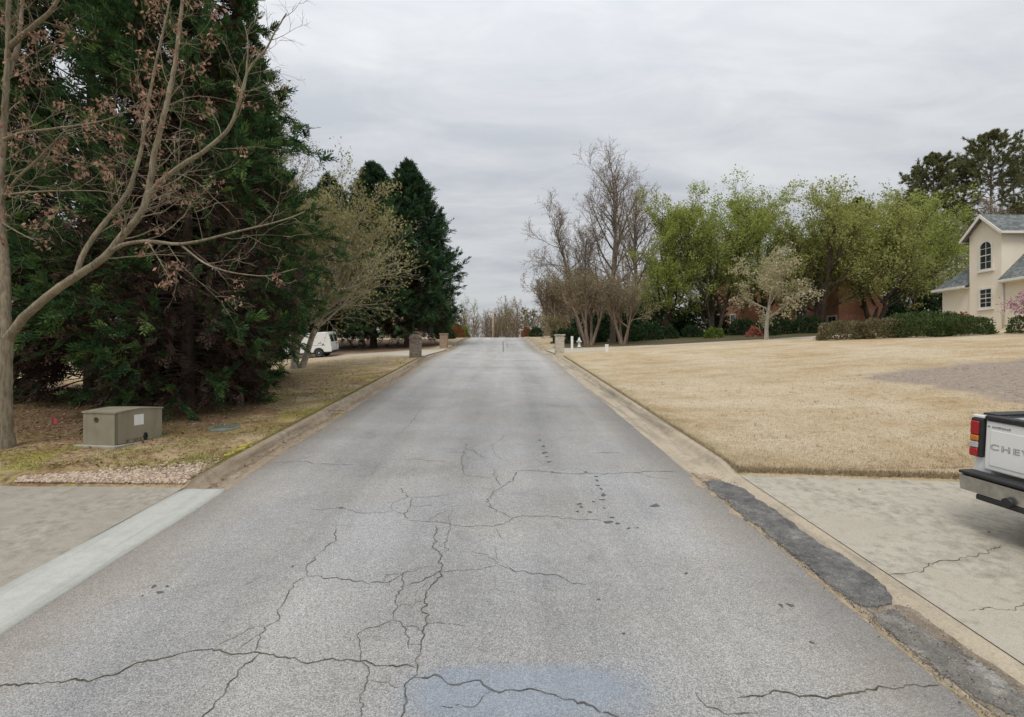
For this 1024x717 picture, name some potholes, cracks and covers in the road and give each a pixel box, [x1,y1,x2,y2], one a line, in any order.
crack [0,438,673,717]
crack [893,546,1000,574]
crack [696,683,930,714]
utility cover [208,424,241,432]
